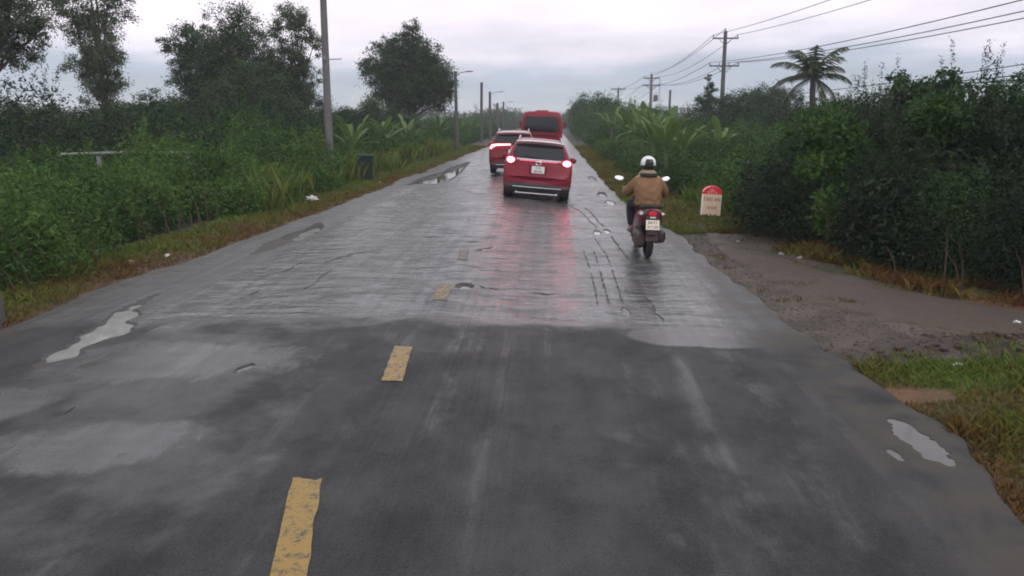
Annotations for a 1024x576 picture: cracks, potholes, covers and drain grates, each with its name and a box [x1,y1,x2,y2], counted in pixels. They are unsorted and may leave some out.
crack [570,205,629,305]
crack [644,297,664,324]
pothole [406,162,470,185]
pothole [886,418,957,467]
crack [236,250,381,301]
pothole [32,293,162,368]
